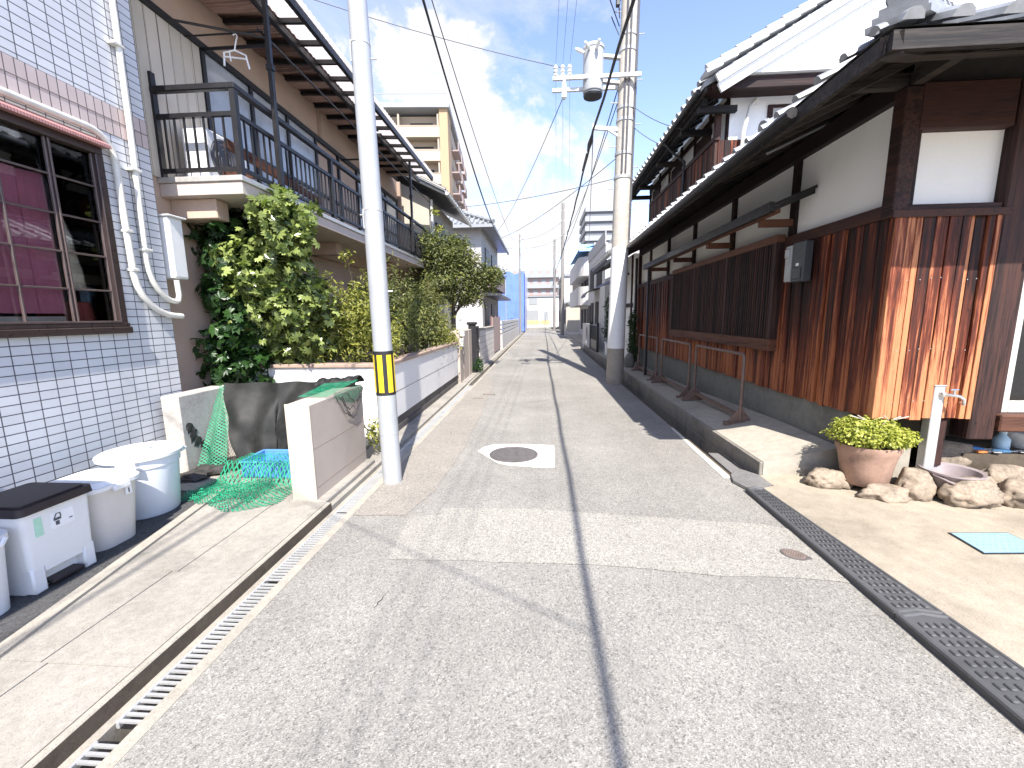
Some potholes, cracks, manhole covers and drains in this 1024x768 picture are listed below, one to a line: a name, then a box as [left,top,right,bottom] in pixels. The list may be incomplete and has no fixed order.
utility cover [780,548,813,561]
drain grate [265,512,345,583]
manhole cover [478,444,555,468]
drain grate [67,741,118,768]
drain grate [336,471,383,513]
drain grate [115,580,276,729]
